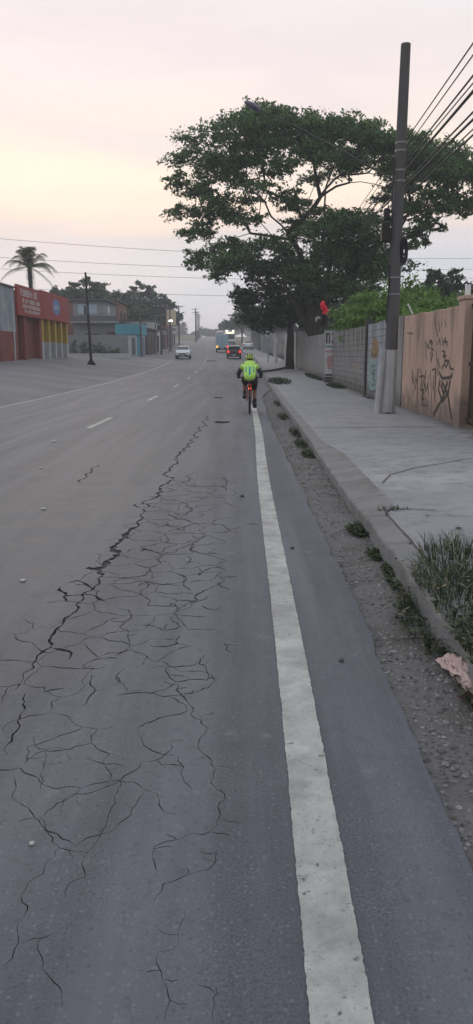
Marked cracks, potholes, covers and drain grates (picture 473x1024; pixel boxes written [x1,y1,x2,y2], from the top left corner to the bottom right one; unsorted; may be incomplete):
crack [0,416,241,1019]
